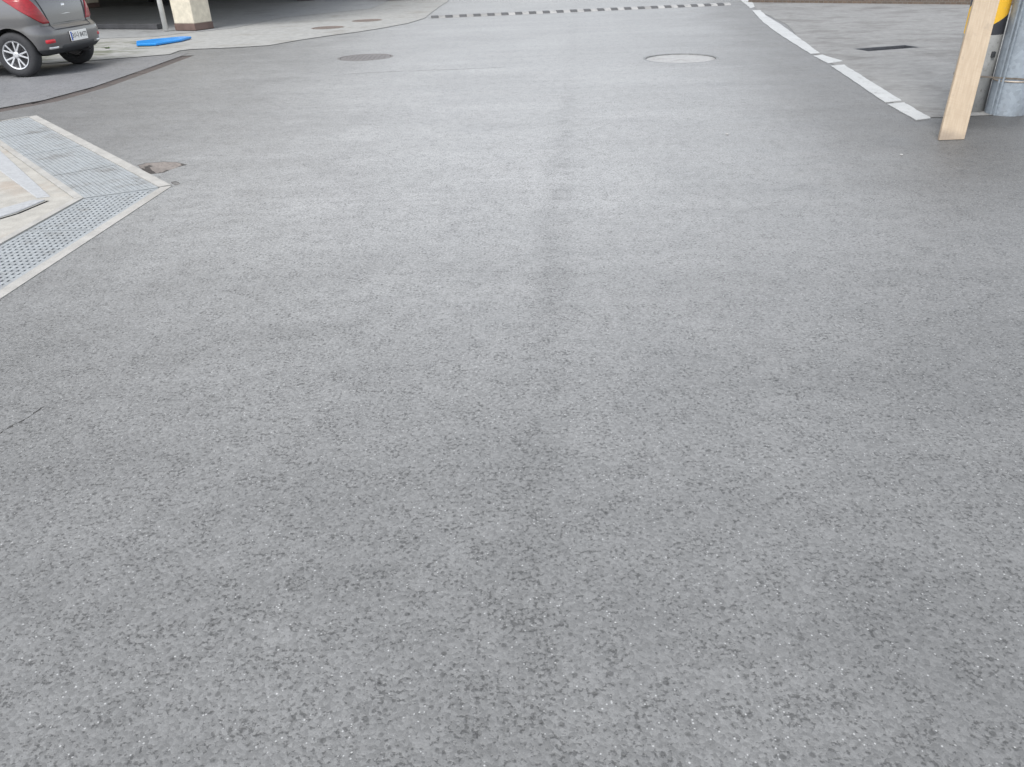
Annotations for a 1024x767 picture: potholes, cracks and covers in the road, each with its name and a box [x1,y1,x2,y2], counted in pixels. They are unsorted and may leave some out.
manhole cover [643,53,719,63]
